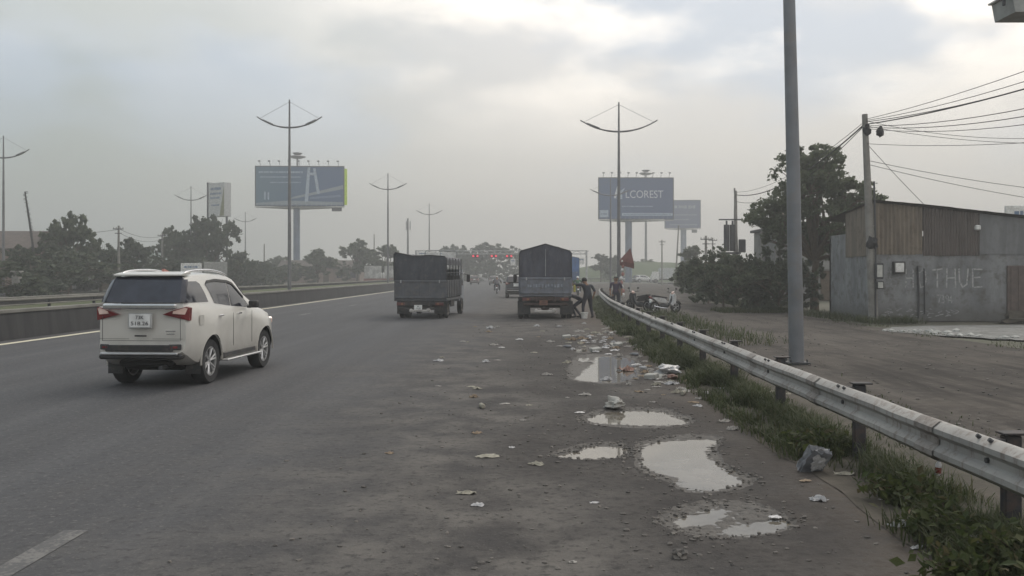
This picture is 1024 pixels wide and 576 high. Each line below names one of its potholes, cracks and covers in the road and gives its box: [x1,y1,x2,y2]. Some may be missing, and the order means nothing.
pothole [538,438,643,467]
pothole [562,353,651,385]
pothole [558,404,711,430]
pothole [620,431,766,495]
pothole [631,491,820,549]
